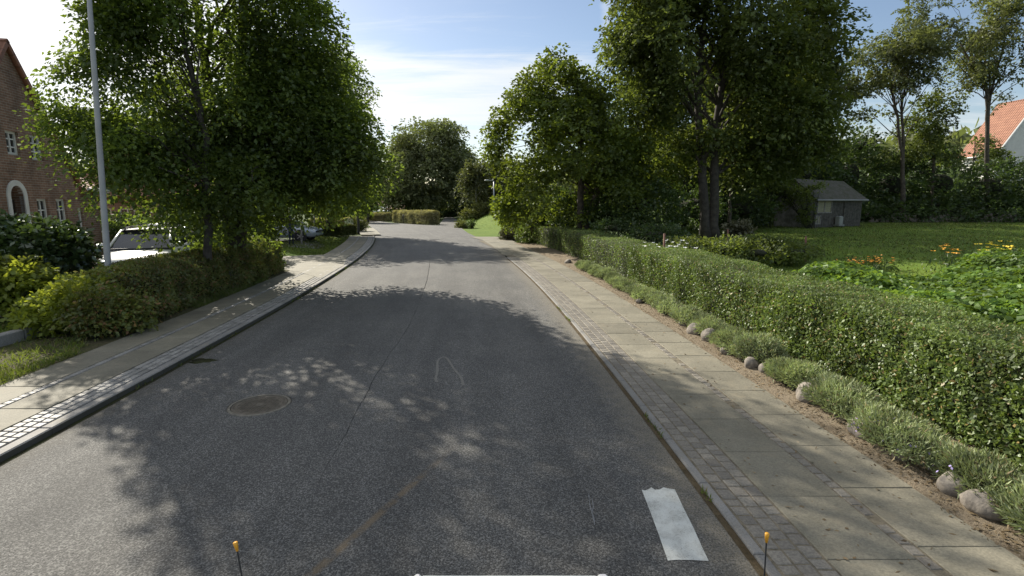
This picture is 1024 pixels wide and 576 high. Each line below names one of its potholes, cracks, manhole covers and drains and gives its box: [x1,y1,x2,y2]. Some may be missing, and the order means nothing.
crack [318,265,430,483]
manhole cover [226,394,292,416]
